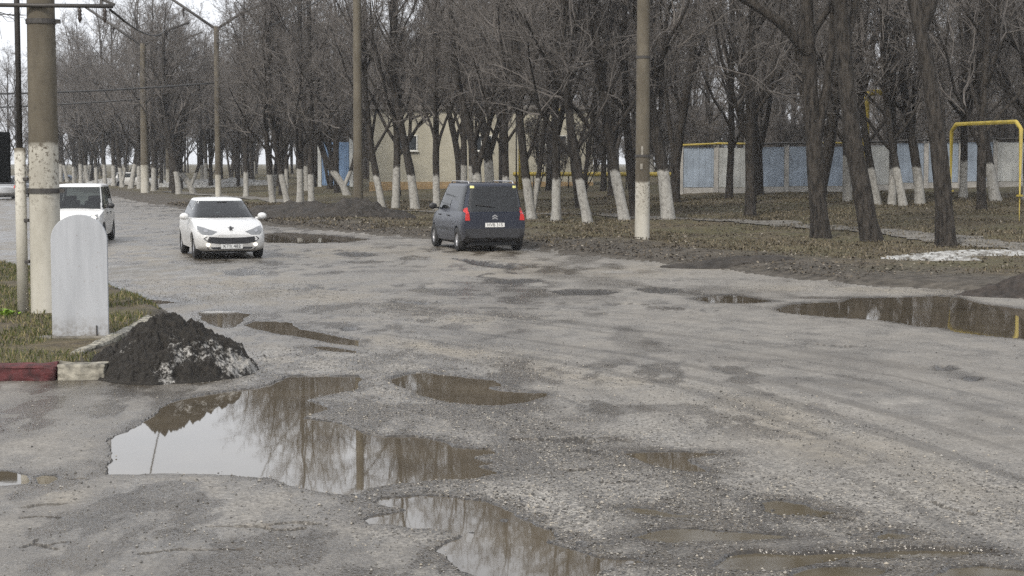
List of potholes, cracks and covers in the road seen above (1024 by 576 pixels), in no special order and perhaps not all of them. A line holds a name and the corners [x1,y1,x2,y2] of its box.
pothole [0,470,32,486]
pothole [264,232,370,244]
pothole [33,473,62,484]
pothole [386,371,550,405]
pothole [788,564,889,576]
pothole [759,498,840,518]
pothole [776,295,1024,339]
pothole [245,319,362,346]
pothole [198,309,252,328]
pothole [695,294,771,303]
pothole [358,493,648,576]
pothole [709,545,1006,571]
